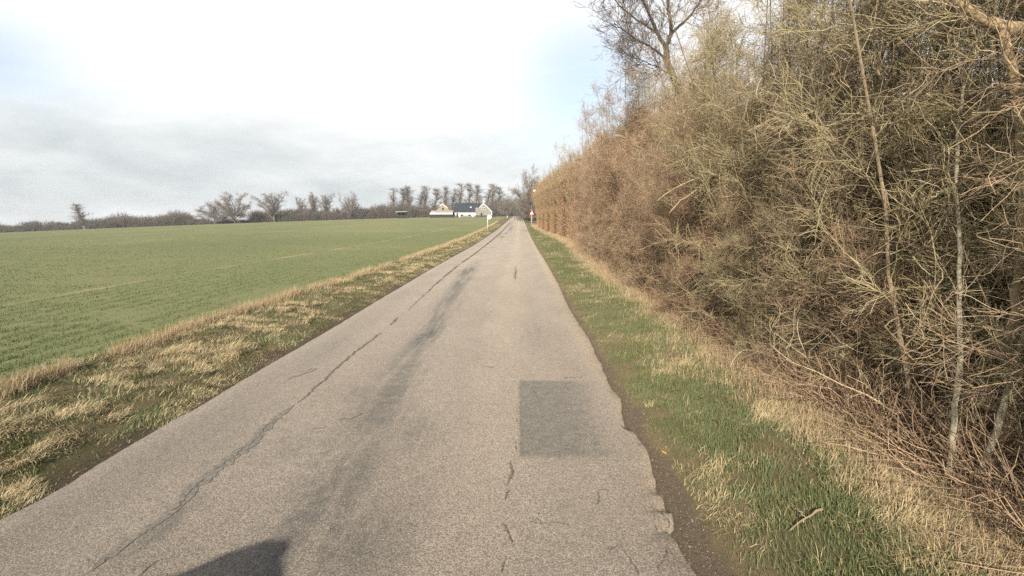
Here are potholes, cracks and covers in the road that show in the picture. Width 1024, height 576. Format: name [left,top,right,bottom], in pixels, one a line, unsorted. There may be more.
crack [89,223,510,576]
crack [606,546,639,575]
crack [652,506,674,569]
crack [501,419,518,573]
